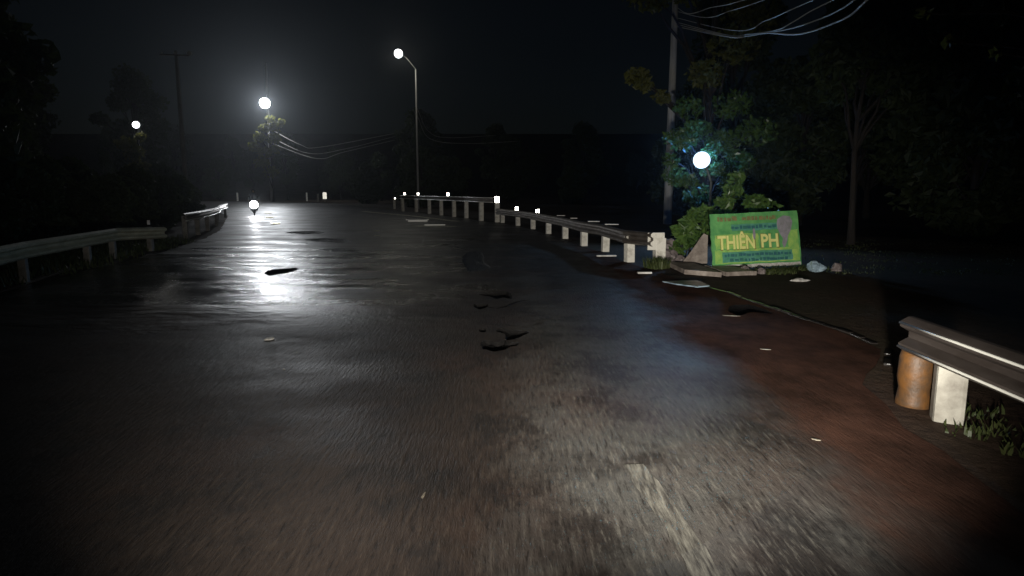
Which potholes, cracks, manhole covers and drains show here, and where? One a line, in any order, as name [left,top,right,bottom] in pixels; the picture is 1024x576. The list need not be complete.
pothole [462,251,491,272]
pothole [480,340,520,351]
pothole [264,268,298,276]
pothole [728,304,772,316]
pothole [496,329,529,340]
